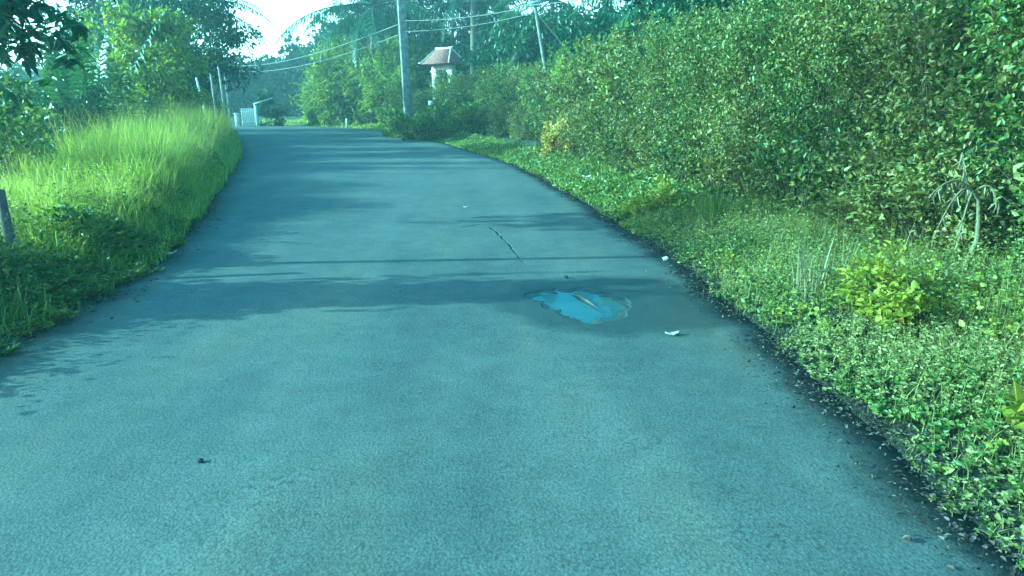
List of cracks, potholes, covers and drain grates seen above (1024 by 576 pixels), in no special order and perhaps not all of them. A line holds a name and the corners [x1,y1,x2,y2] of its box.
crack [465,224,524,263]
pothole [523,287,632,325]
